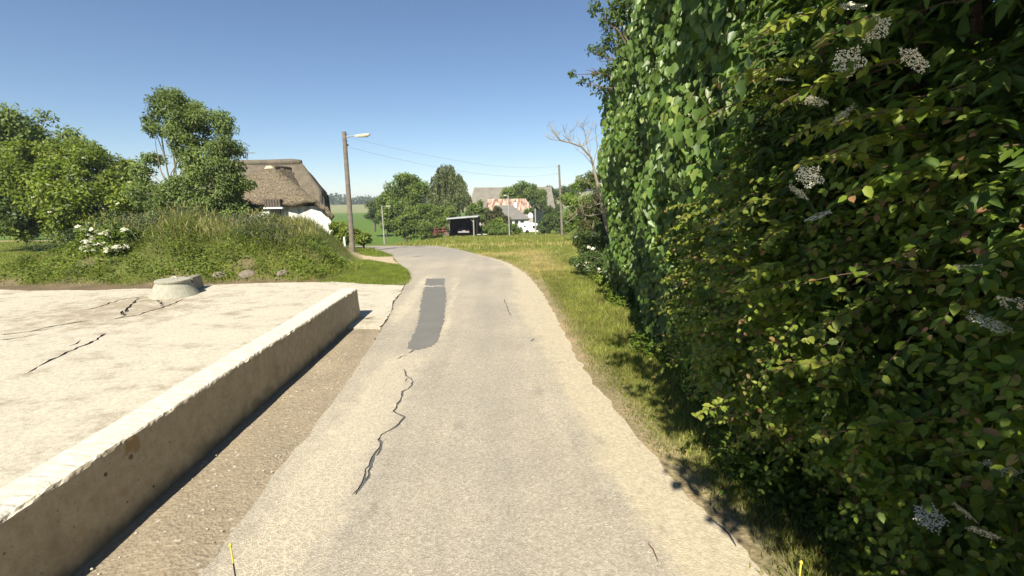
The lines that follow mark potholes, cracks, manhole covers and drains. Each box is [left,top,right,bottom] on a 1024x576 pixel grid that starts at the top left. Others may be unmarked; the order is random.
manhole cover [148,276,200,300]
crack [354,350,414,493]
crack [2,297,183,372]
